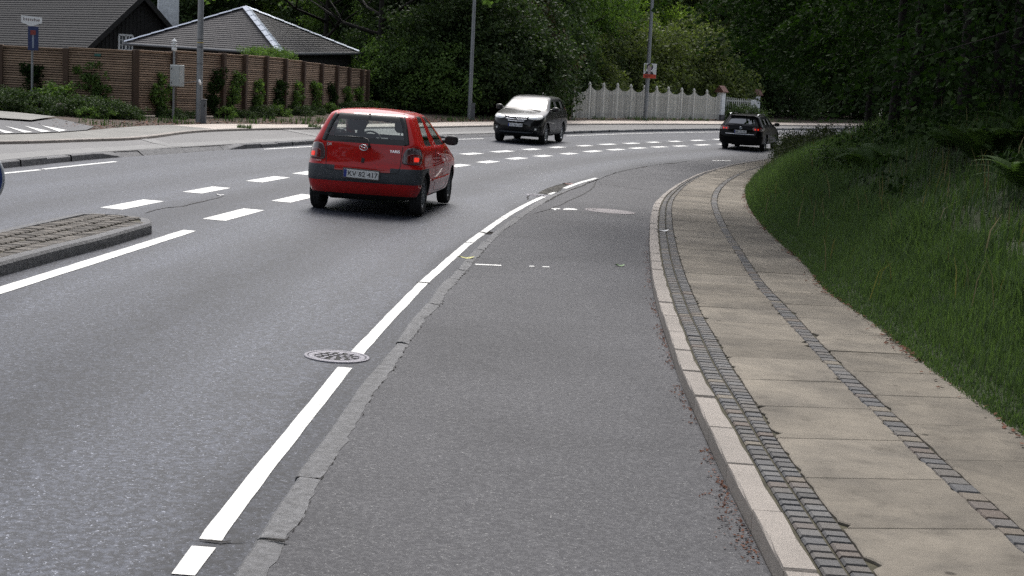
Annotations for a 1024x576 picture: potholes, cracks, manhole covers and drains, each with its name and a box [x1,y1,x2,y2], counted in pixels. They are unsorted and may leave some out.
manhole cover [304,350,370,364]
